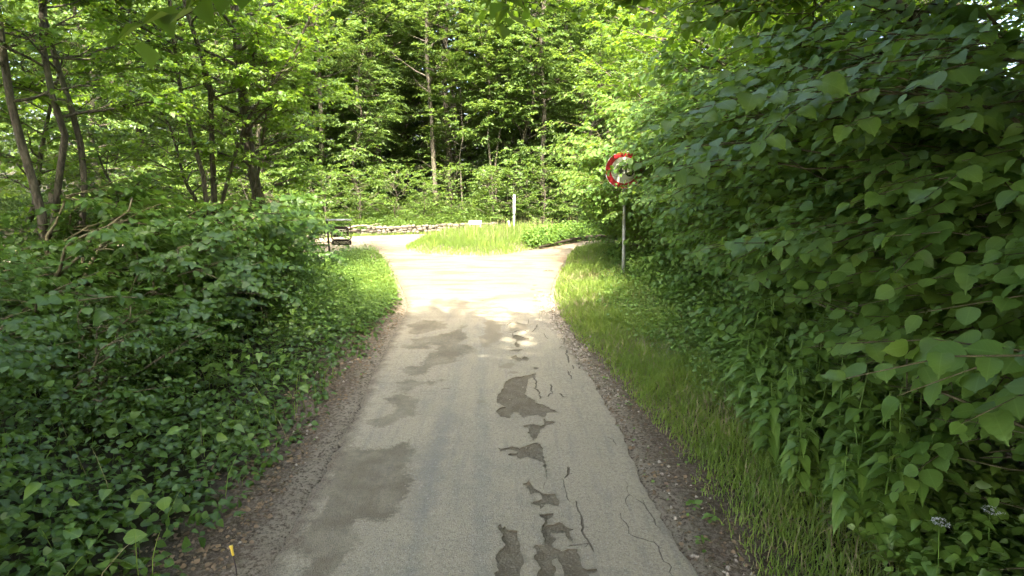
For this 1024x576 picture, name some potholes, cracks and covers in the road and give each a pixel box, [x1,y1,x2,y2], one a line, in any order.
crack [563,467,594,552]
pothole [534,513,597,576]
pothole [523,480,560,509]
pothole [496,373,556,418]
crack [620,479,672,575]
pothole [499,443,547,477]
crack [507,320,581,399]
pothole [494,524,524,576]
